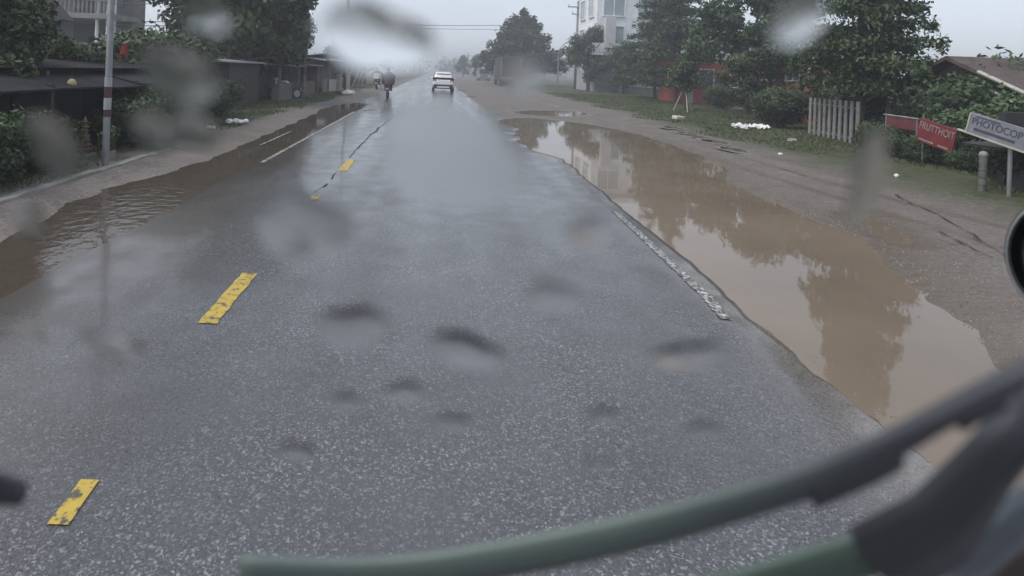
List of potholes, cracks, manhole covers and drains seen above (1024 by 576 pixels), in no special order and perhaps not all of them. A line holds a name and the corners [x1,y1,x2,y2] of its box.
crack [314,110,389,192]
crack [896,194,1005,258]
